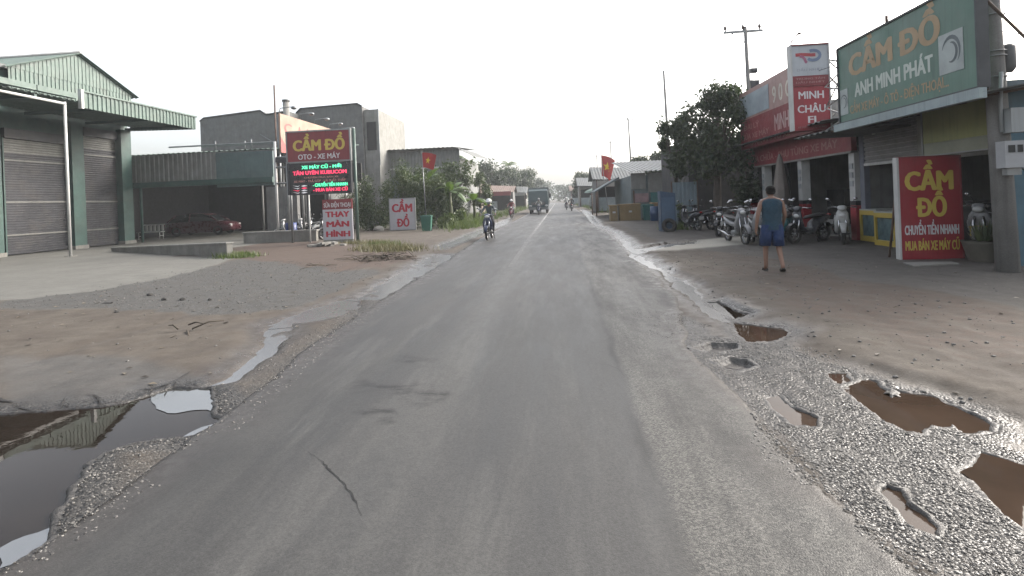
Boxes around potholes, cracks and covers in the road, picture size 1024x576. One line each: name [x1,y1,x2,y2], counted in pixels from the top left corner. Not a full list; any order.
pothole [872,482,948,540]
pothole [0,385,229,571]
pothole [838,378,999,435]
crack [309,452,362,515]
pothole [731,322,792,343]
pothole [949,450,1024,531]
pothole [705,300,754,319]
pothole [762,395,824,429]
pothole [707,355,760,373]
pothole [824,371,856,387]
pothole [686,341,742,353]
